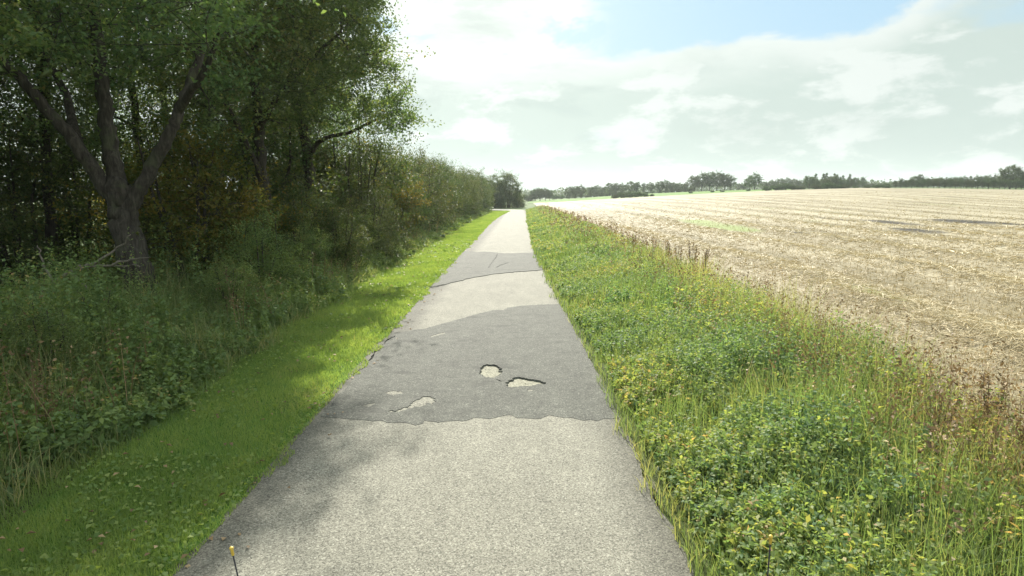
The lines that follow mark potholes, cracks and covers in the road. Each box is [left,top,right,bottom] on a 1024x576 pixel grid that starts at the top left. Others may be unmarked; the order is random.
pothole [479,364,503,378]
pothole [505,377,546,387]
